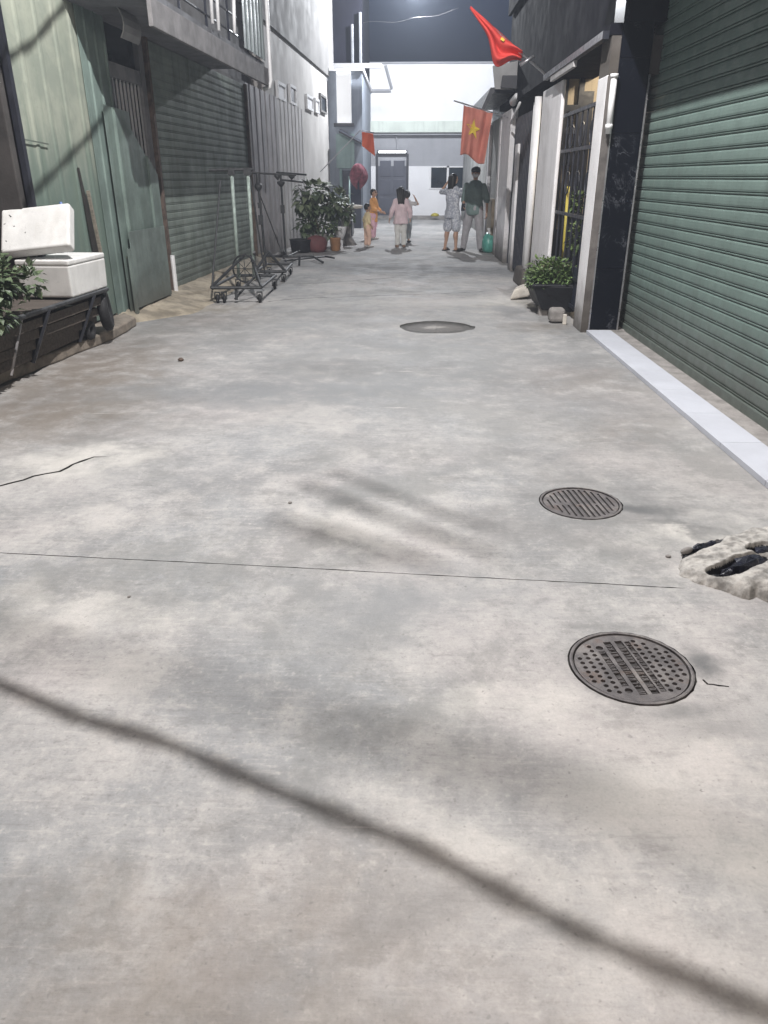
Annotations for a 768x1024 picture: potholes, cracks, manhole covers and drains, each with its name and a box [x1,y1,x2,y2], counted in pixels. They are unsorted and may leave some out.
manhole cover [400,321,475,333]
manhole cover [539,487,623,520]
manhole cover [568,632,697,706]
crack [0,457,94,486]
